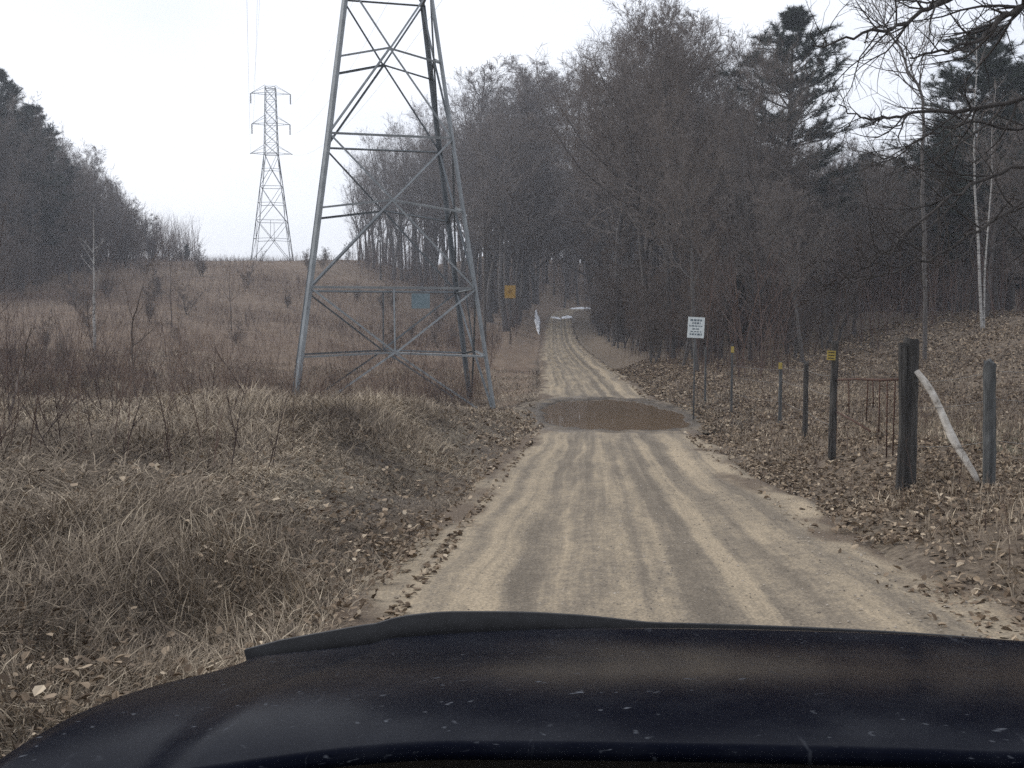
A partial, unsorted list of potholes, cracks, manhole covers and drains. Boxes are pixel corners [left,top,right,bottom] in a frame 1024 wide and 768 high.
pothole [508,397,722,434]
